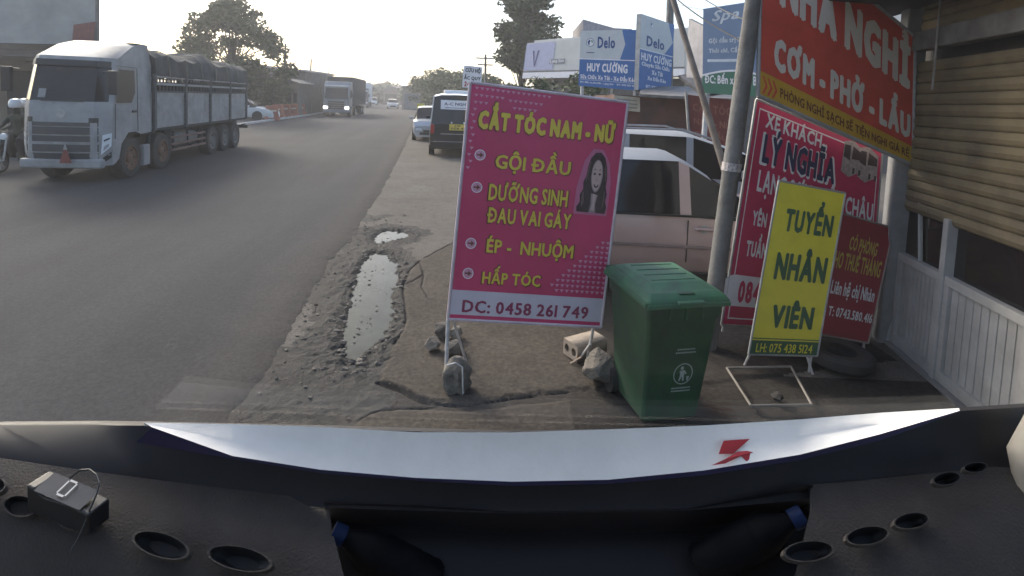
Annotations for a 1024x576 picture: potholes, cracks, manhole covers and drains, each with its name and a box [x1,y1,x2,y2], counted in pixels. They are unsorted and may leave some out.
crack [363,380,528,419]
pothole [329,248,408,365]
crack [392,243,452,346]
pothole [370,228,414,243]
